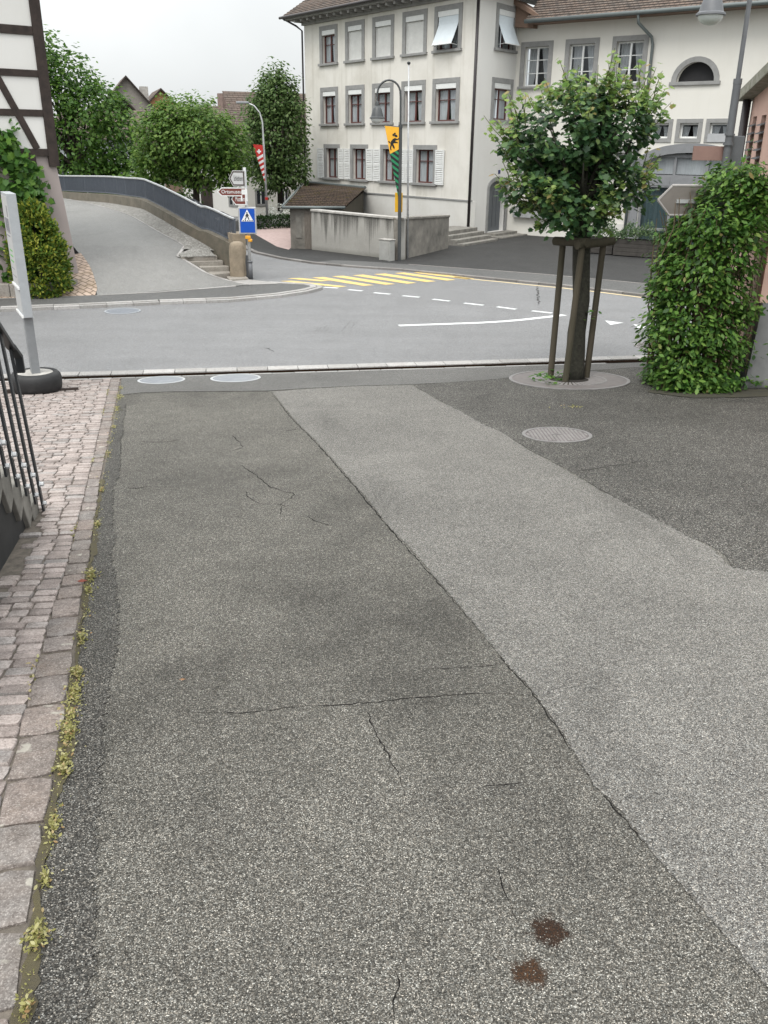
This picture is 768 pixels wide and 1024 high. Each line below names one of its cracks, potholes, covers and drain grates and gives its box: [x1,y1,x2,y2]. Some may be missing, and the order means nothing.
crack [392,971,401,1015]
manhole cover [210,374,261,382]
crack [233,436,328,525]
crack [495,865,517,923]
manhole cover [522,427,592,443]
manhole cover [137,376,185,384]
crack [168,693,528,788]
